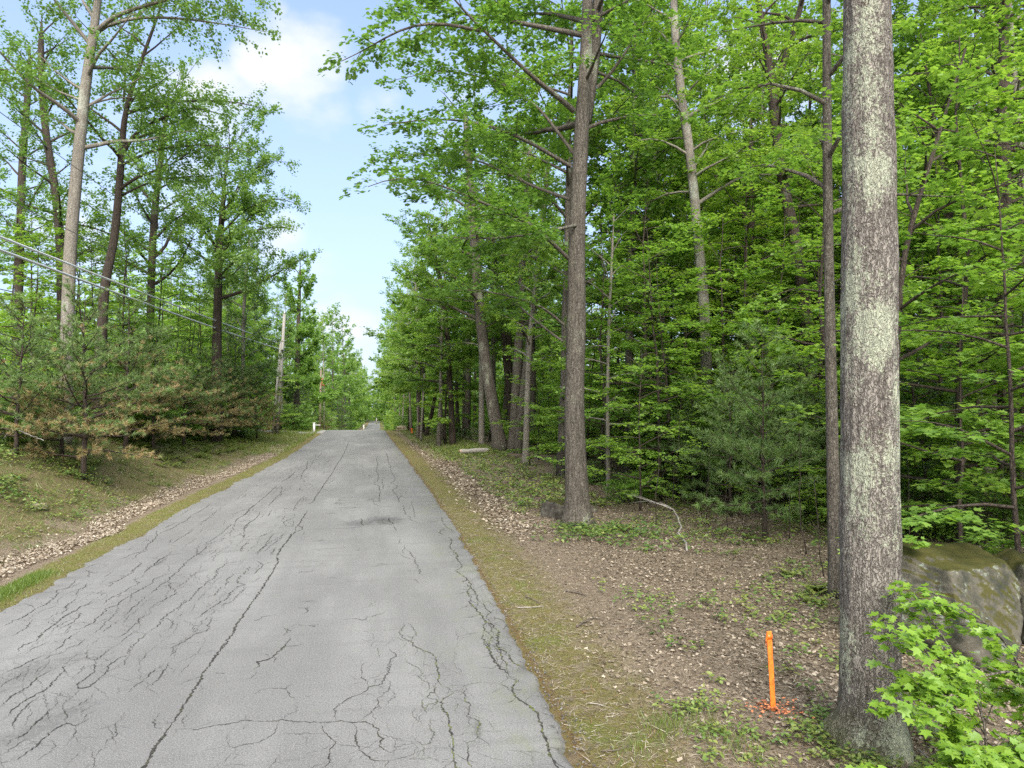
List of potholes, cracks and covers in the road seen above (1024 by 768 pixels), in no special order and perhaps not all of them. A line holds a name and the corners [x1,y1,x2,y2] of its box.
crack [166,649,429,767]
crack [432,518,575,768]
crack [0,455,331,768]
crack [353,601,500,768]
